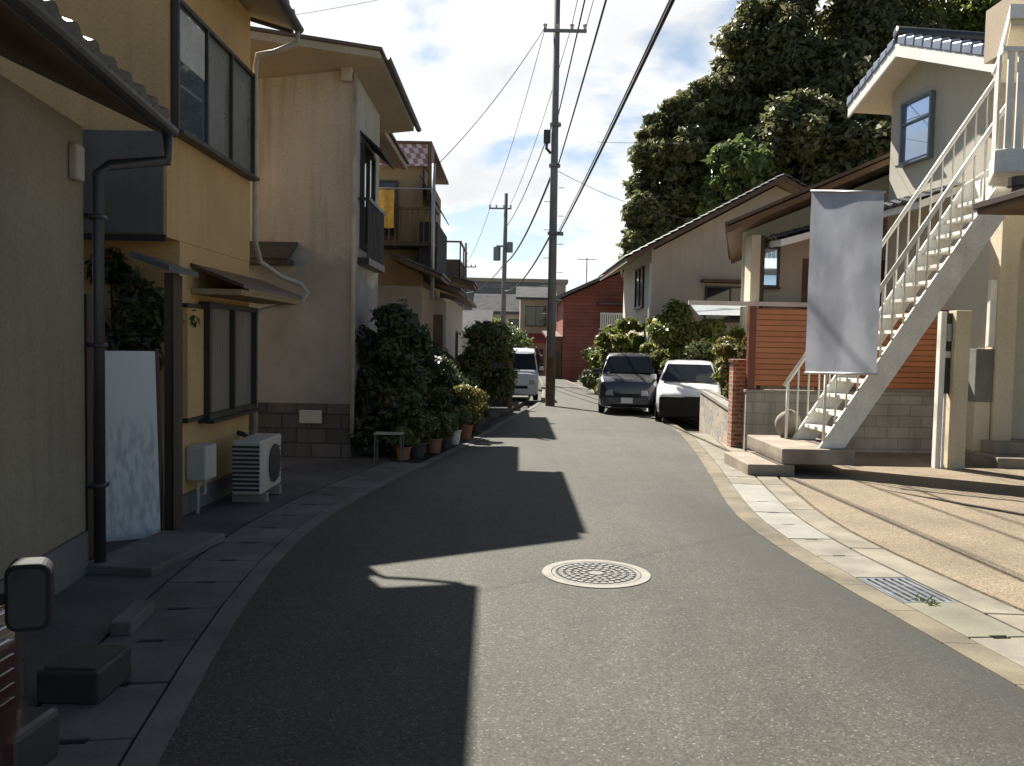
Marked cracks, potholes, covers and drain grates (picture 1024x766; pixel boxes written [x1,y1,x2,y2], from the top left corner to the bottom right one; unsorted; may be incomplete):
manhole cover [542,559,651,589]
drain grate [857,578,957,604]
